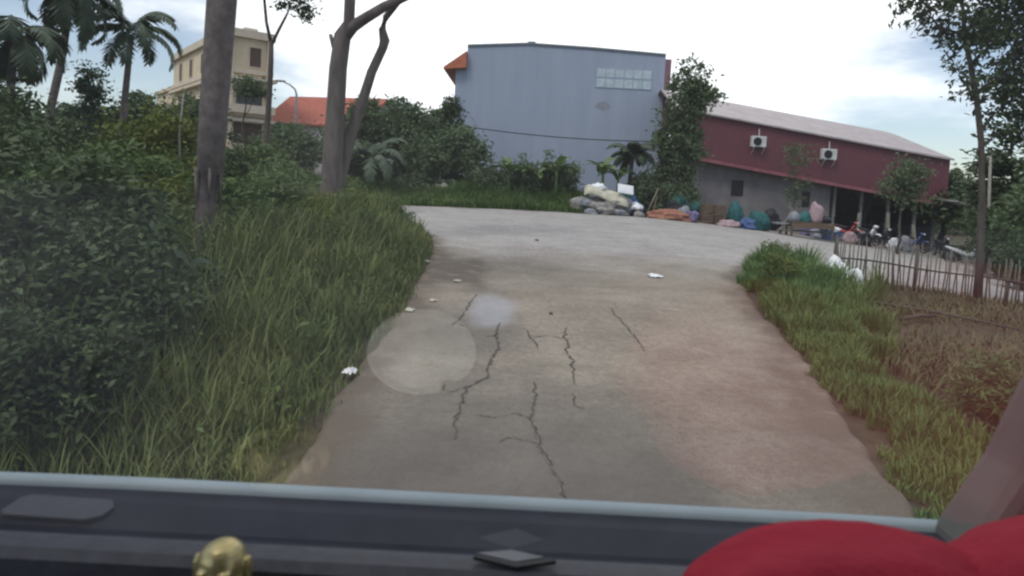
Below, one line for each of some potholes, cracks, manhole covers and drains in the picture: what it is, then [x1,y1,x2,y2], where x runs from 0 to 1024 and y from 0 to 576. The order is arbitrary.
crack [442,295,584,499]
crack [609,305,678,351]
